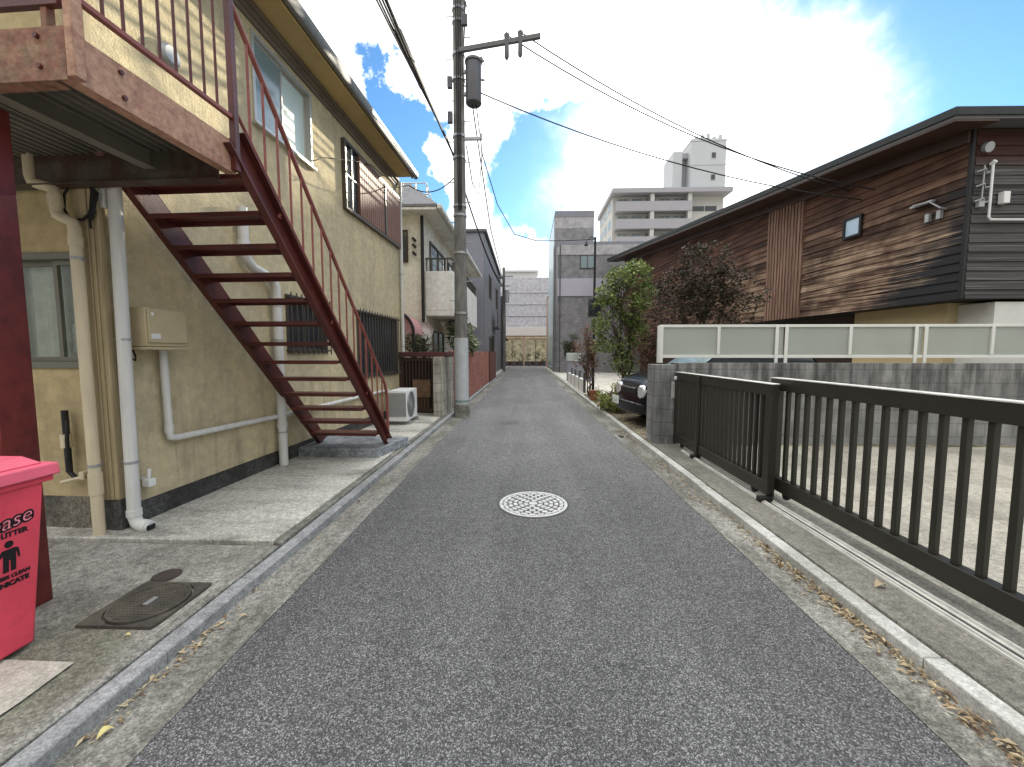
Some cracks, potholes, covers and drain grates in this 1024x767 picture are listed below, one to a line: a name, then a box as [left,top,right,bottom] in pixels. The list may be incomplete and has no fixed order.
manhole cover [75,581,212,630]
manhole cover [150,568,183,582]
manhole cover [498,491,569,518]
